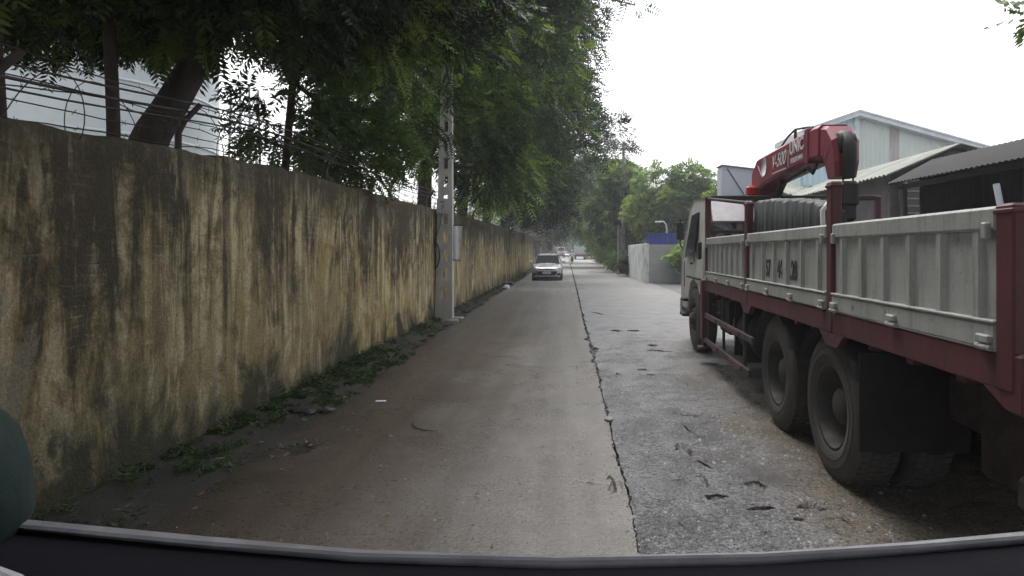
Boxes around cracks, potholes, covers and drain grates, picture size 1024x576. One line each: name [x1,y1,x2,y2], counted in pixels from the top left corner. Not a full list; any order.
pothole [733,477,779,494]
pothole [693,491,741,506]
crack [662,411,728,485]
pothole [598,472,622,497]
pothole [735,502,784,515]
